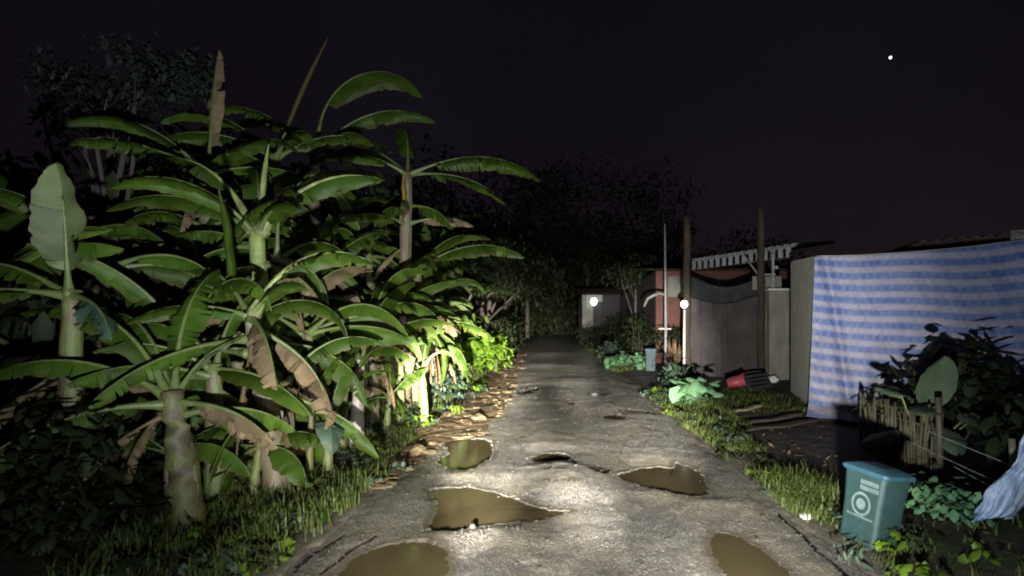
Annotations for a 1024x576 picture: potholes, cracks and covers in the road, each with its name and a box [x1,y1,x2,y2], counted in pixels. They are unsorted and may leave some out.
pothole [617,462,710,496]
pothole [337,538,449,576]
pothole [426,486,570,532]
pothole [532,452,572,462]
pothole [709,532,790,576]
pothole [438,438,494,471]
